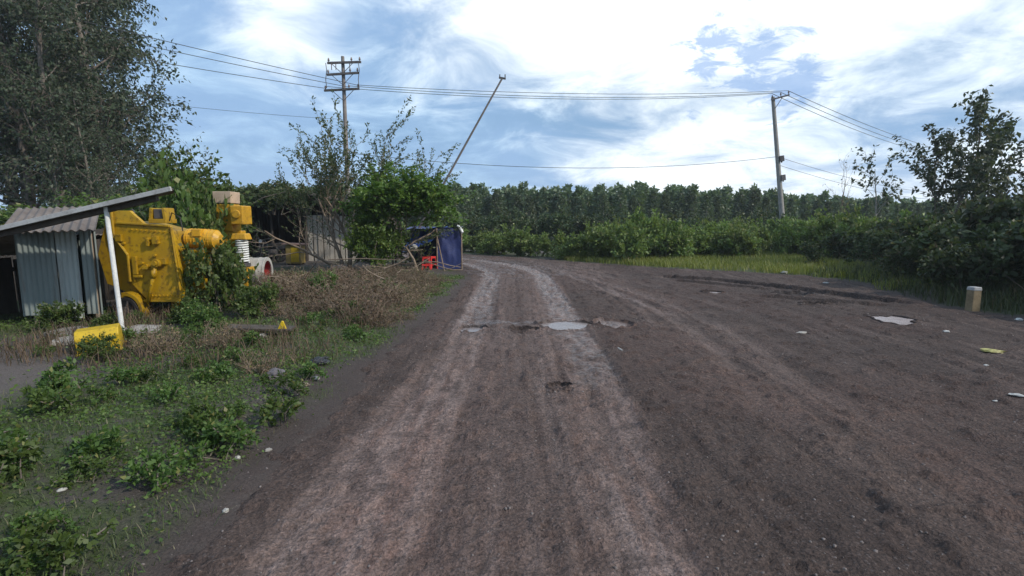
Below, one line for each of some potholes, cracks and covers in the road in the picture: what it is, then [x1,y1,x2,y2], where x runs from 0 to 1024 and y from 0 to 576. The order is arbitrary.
pothole [591,317,637,330]
pothole [863,314,922,326]
pothole [457,324,489,333]
pothole [544,381,576,393]
pothole [534,319,595,332]
pothole [507,324,543,334]
